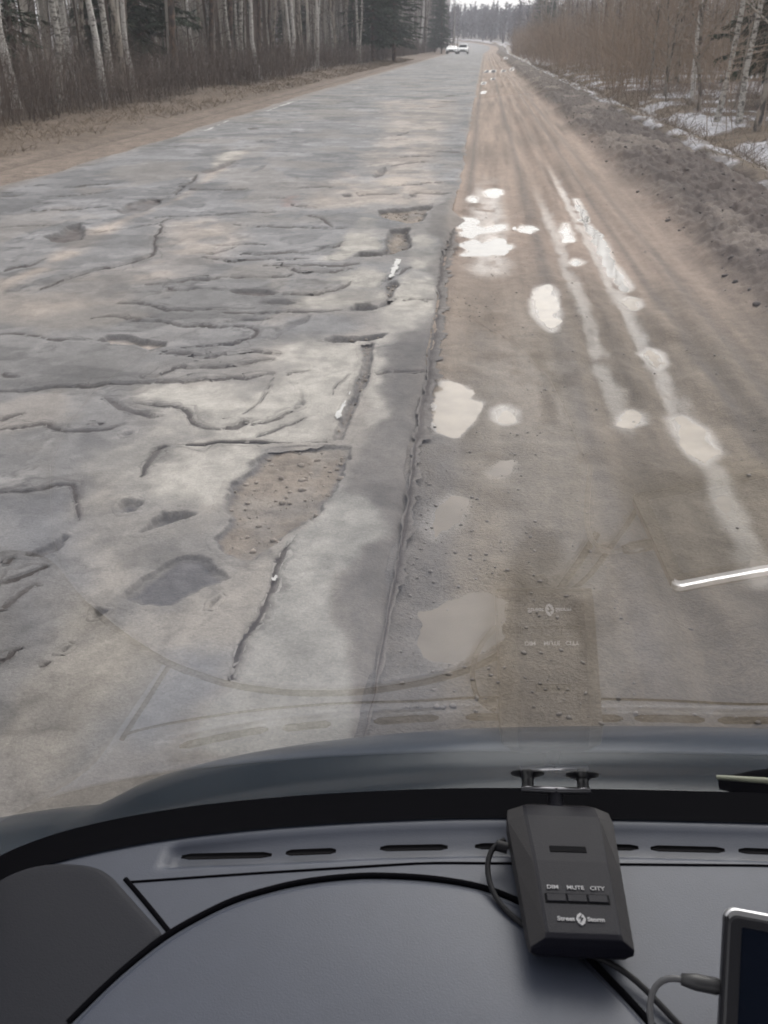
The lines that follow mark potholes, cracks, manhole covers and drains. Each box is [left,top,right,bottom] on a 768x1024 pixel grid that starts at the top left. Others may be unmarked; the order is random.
pothole [373,204,439,224]
pothole [111,495,150,517]
pothole [346,227,418,259]
pothole [102,551,252,616]
pothole [205,442,361,568]
crack [0,131,468,626]
pothole [39,222,93,244]
crack [0,645,42,665]
pothole [128,507,210,538]
